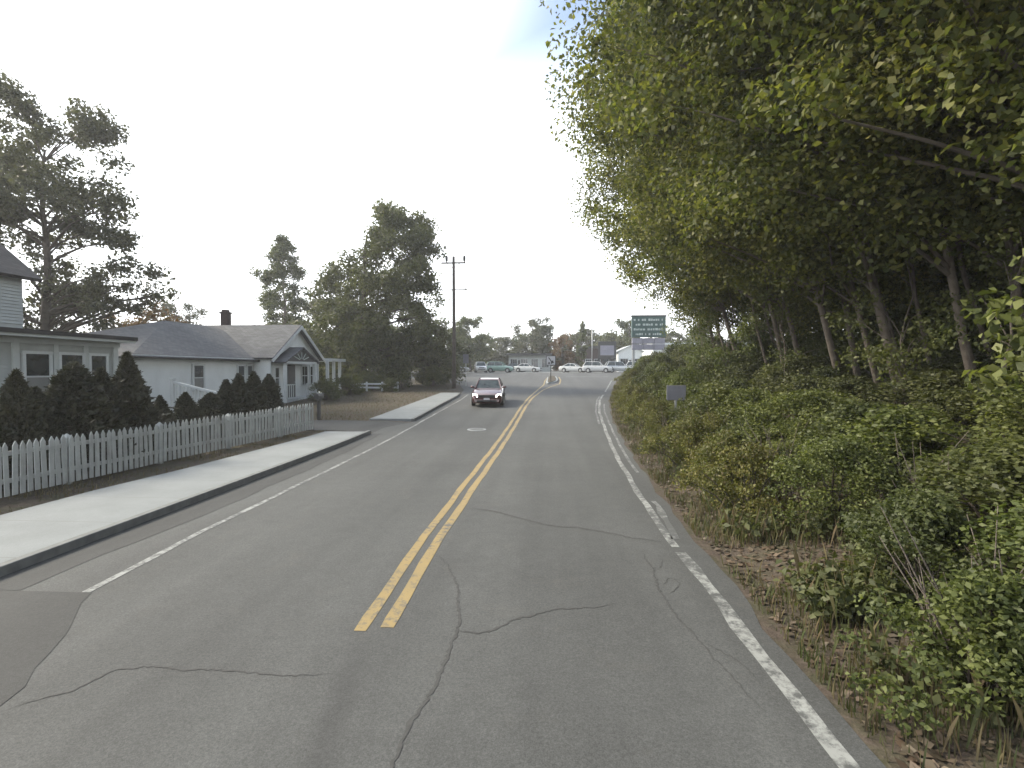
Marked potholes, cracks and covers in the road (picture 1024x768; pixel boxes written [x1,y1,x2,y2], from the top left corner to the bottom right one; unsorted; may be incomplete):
crack [7,665,334,710]
crack [389,555,606,768]
crack [470,508,655,541]
crack [644,554,758,705]
